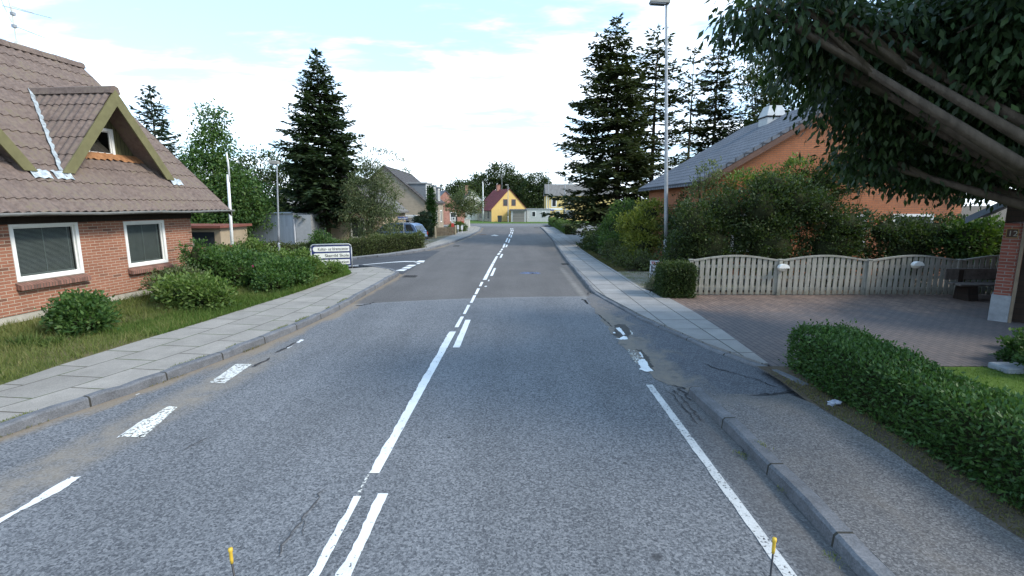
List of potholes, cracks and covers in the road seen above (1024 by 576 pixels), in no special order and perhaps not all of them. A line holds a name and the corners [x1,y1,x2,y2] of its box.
crack [279,489,324,556]
crack [665,384,704,424]
